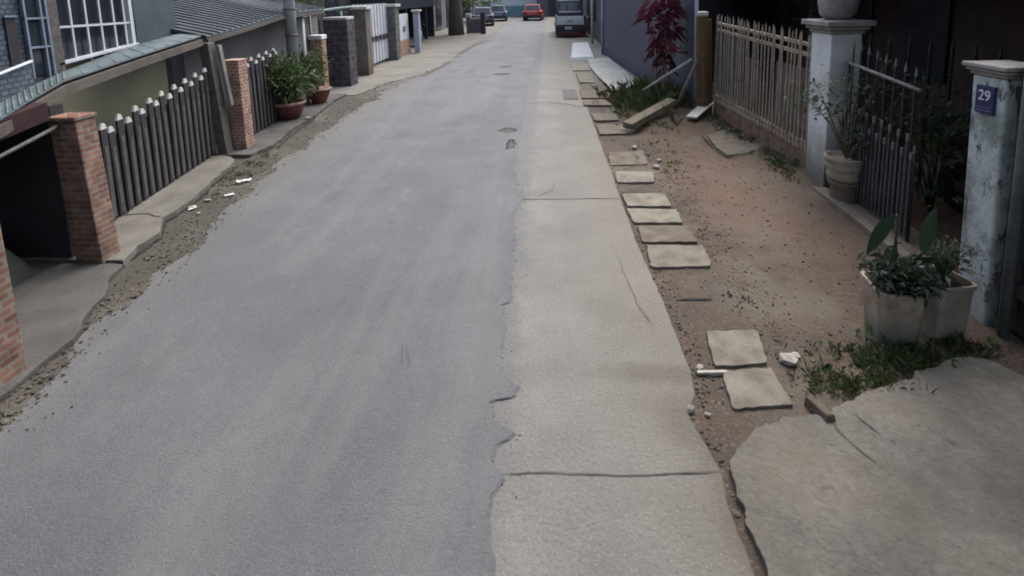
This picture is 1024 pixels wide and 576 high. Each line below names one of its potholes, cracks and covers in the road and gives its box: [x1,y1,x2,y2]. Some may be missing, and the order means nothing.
crack [537,182,619,199]
crack [833,412,881,462]
